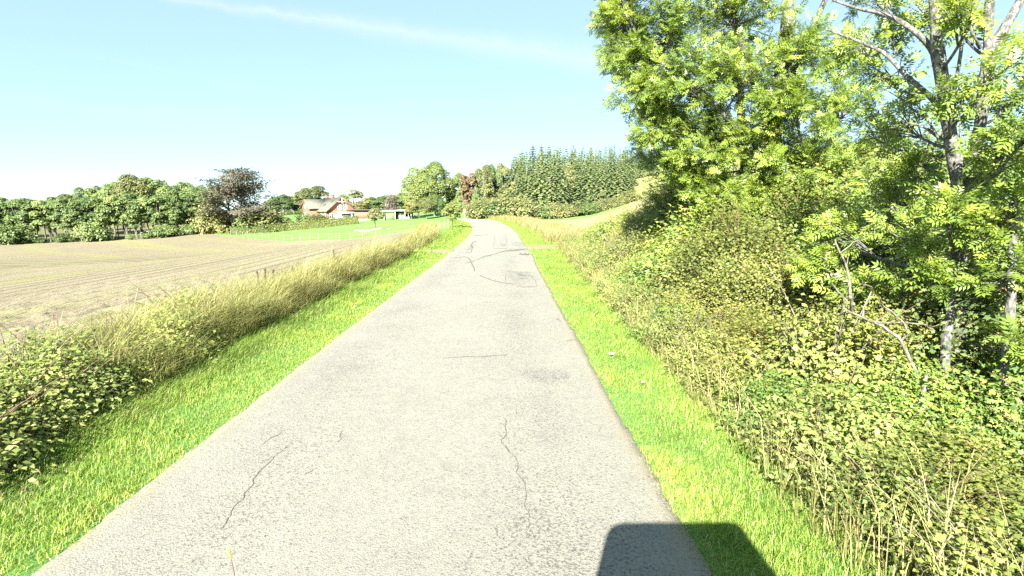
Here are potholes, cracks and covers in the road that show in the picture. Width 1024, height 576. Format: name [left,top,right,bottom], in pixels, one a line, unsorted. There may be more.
crack [453,235,536,287]
crack [501,411,535,539]
crack [222,432,288,529]
